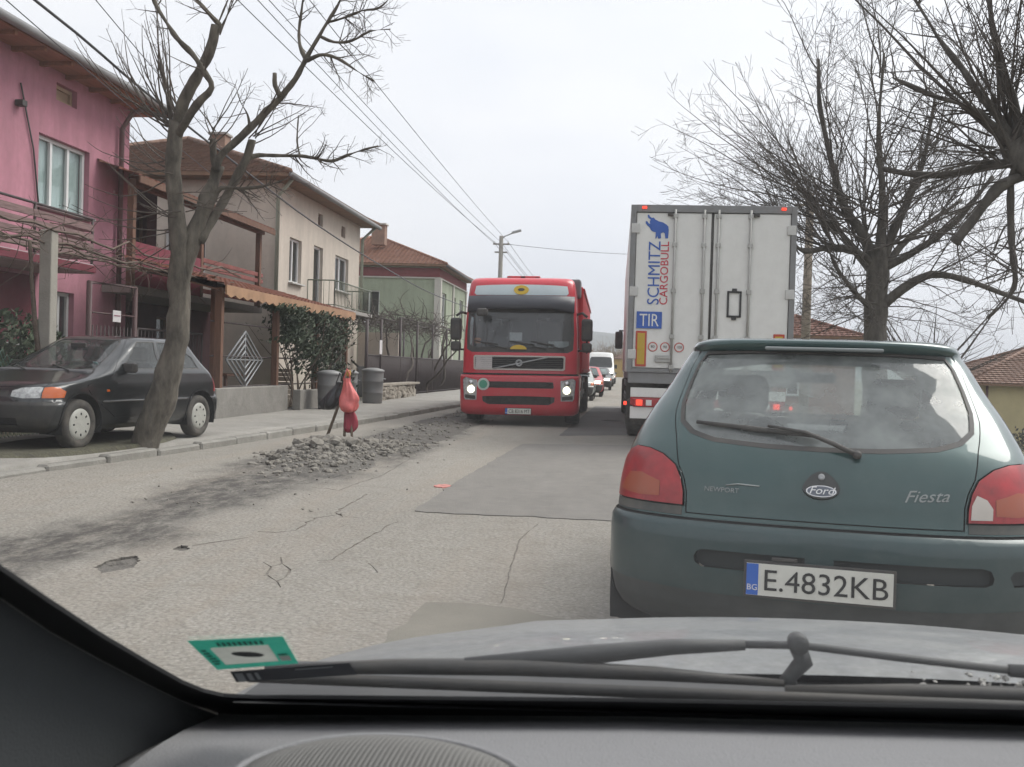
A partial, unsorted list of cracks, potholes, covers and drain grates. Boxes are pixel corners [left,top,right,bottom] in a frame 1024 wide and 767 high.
pothole [93,556,141,573]
crack [192,460,408,572]
crack [263,557,297,588]
crack [501,524,538,603]
